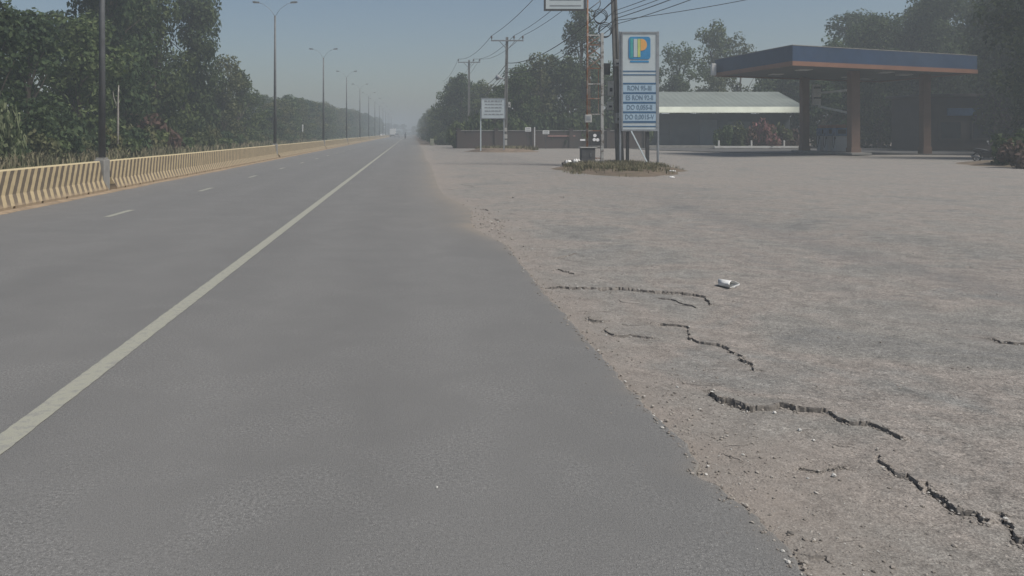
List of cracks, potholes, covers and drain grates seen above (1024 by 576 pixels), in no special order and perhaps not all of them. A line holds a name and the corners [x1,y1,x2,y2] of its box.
crack [545,253,1024,547]
